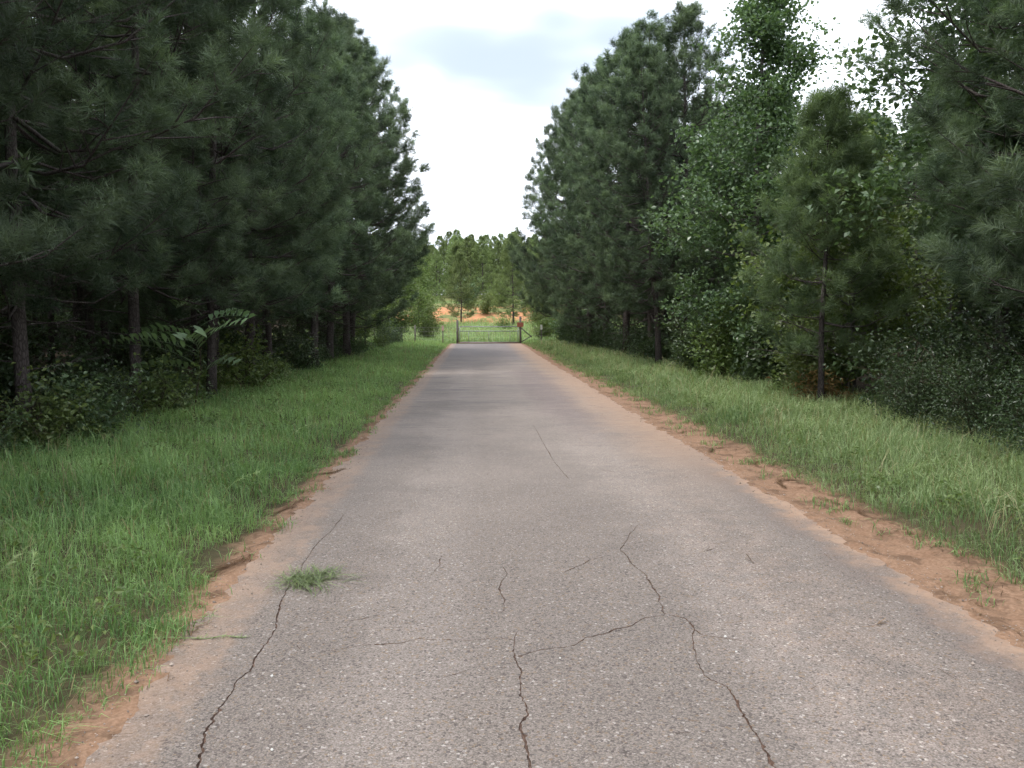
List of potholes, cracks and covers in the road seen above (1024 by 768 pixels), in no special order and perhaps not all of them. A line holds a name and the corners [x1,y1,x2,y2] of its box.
crack [332,528,776,768]
crack [196,514,344,768]
